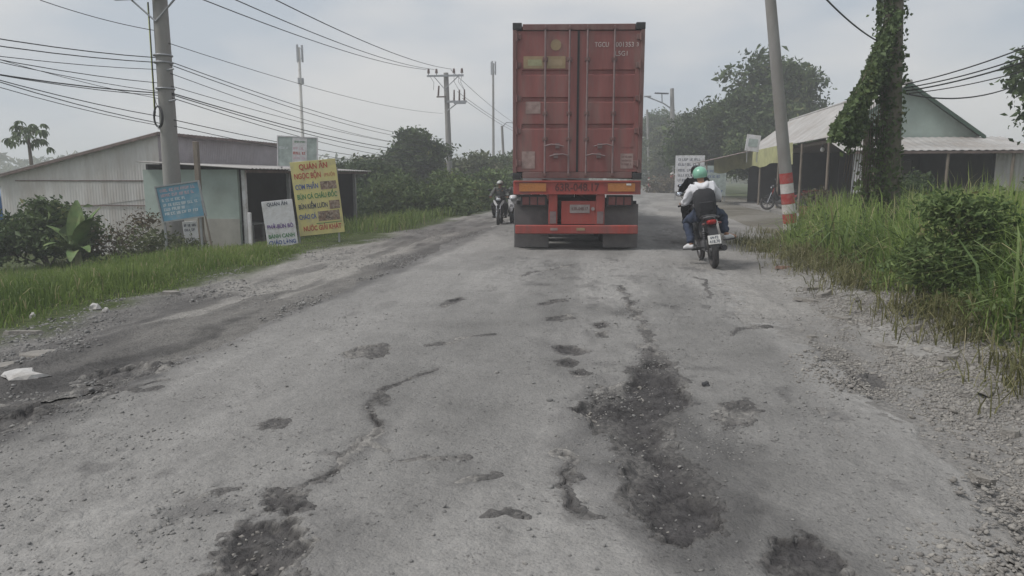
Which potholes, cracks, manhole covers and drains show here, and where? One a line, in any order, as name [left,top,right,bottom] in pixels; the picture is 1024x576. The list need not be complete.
pothole [261,482,317,516]
pothole [251,417,292,430]
pothole [69,360,174,386]
crack [479,447,608,520]
pothole [567,339,731,550]
pothole [198,514,321,576]
pothole [709,397,766,431]
pothole [550,345,592,356]
crack [306,368,504,485]
pothole [553,357,580,368]
pothole [338,342,392,359]
pothole [745,529,859,576]
